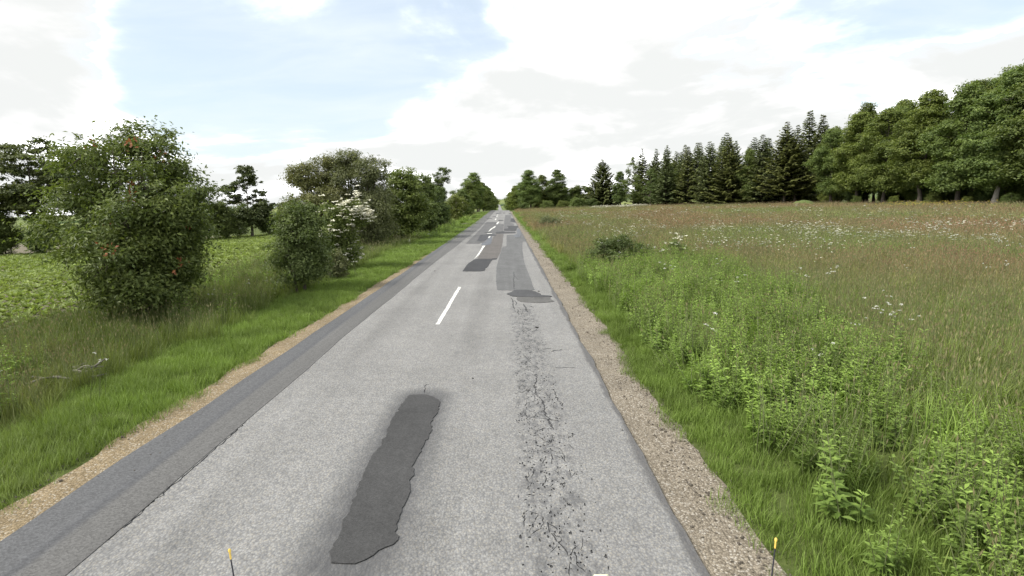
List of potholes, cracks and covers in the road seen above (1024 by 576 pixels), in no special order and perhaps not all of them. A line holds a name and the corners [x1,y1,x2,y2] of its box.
crack [509,272,609,575]
